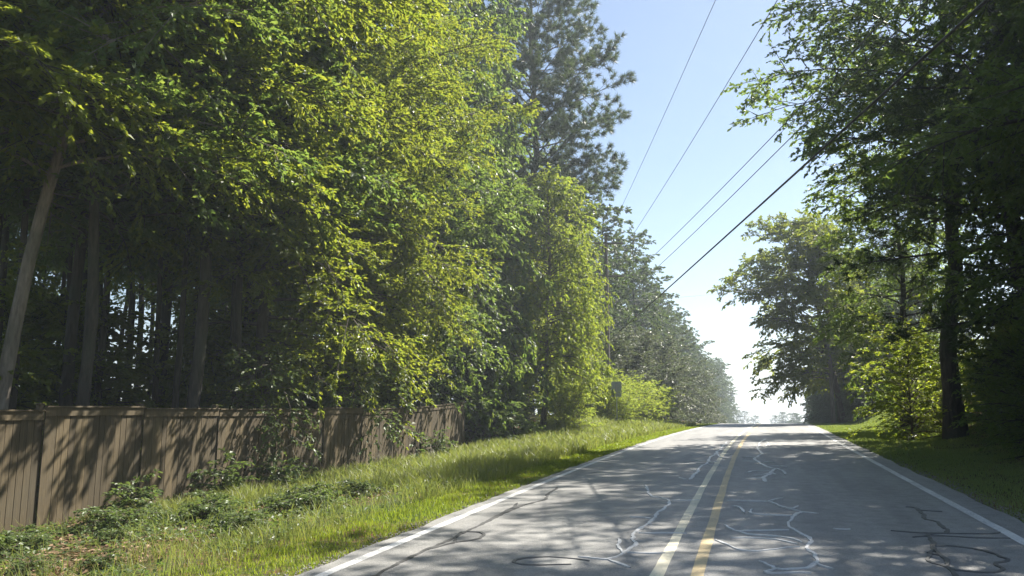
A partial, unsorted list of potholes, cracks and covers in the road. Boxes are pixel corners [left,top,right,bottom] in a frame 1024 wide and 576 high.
crack [891,506,1010,576]
crack [678,439,796,482]
